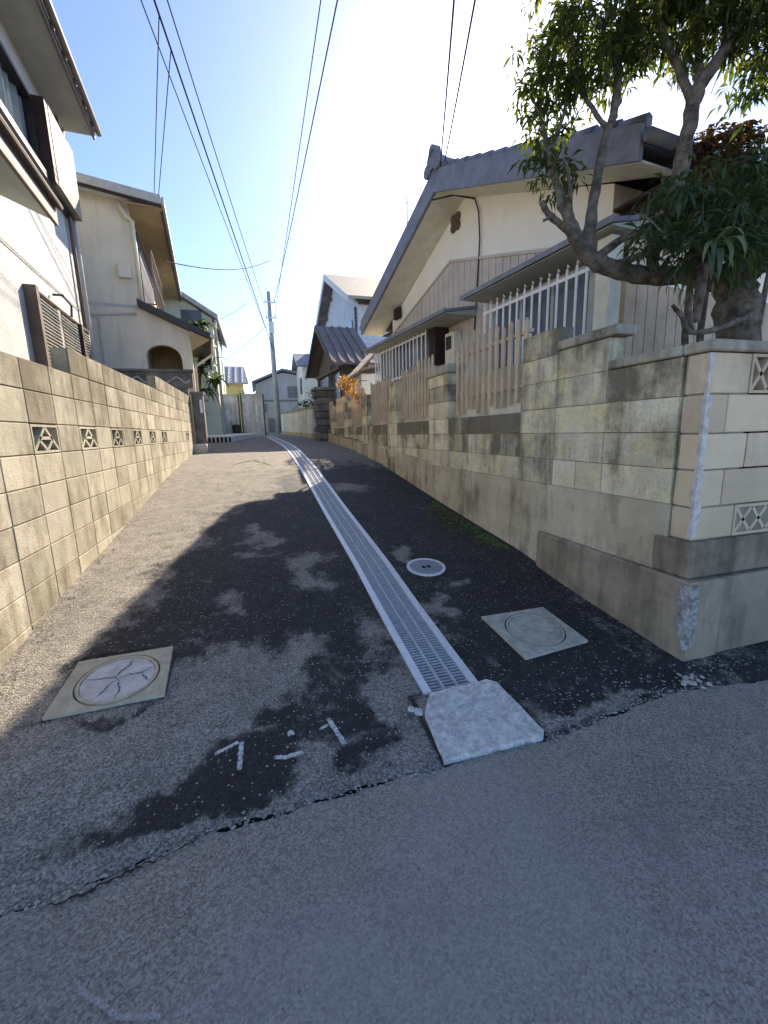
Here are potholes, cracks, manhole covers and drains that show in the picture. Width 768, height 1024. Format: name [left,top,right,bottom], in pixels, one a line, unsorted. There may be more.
manhole cover [42,646,173,721]
manhole cover [481,607,588,660]
manhole cover [407,558,446,576]
